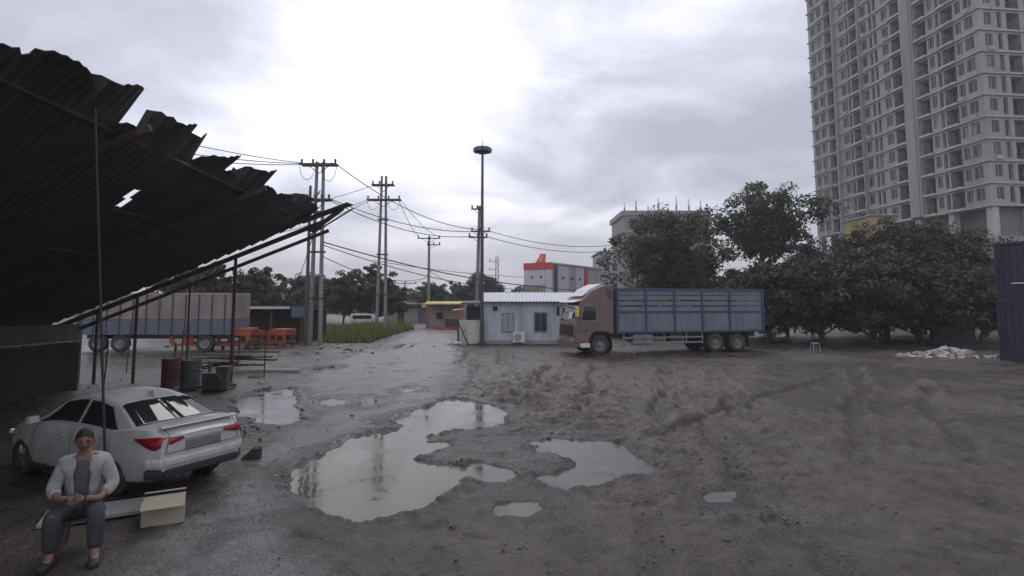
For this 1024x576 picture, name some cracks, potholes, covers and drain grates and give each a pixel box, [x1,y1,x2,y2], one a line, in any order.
pothole [513,433,678,494]
pothole [269,395,520,533]
pothole [455,456,534,489]
pothole [219,386,317,427]
